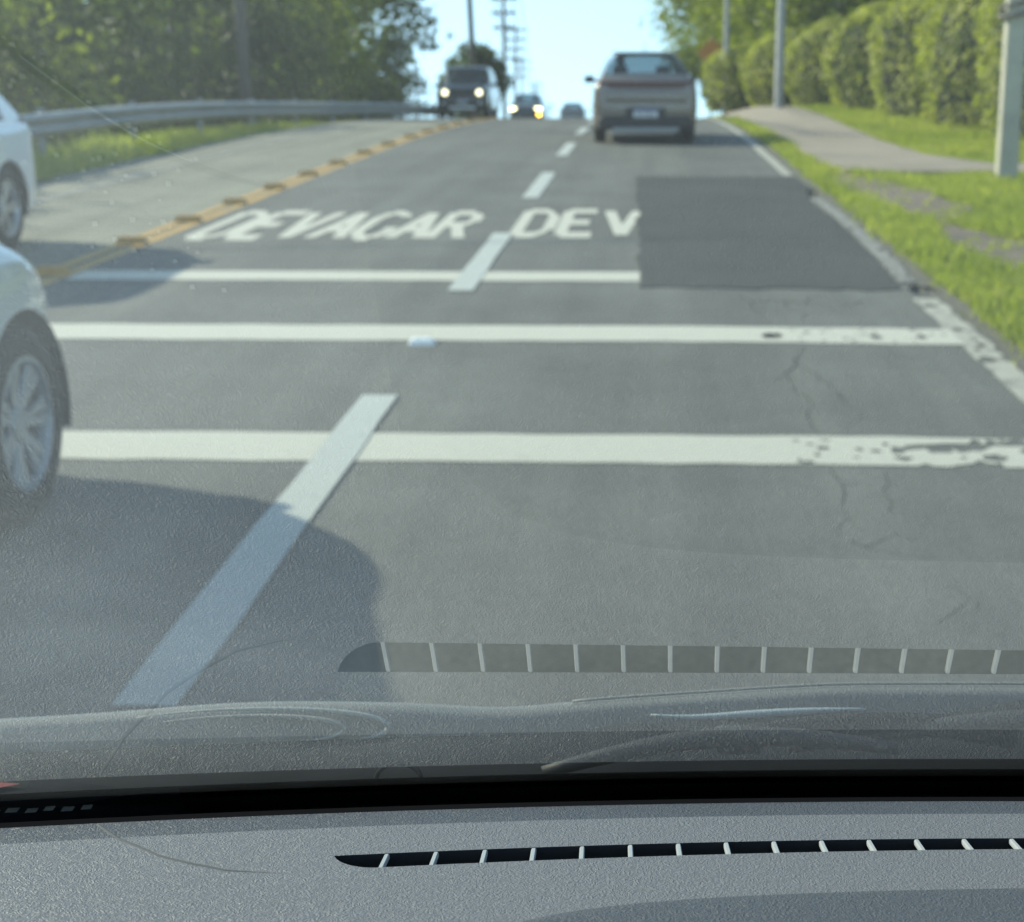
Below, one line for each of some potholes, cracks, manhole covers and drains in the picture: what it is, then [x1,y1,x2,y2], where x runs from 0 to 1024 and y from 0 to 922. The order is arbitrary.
crack [830,469,933,558]
crack [935,585,979,624]
crack [773,347,863,433]
